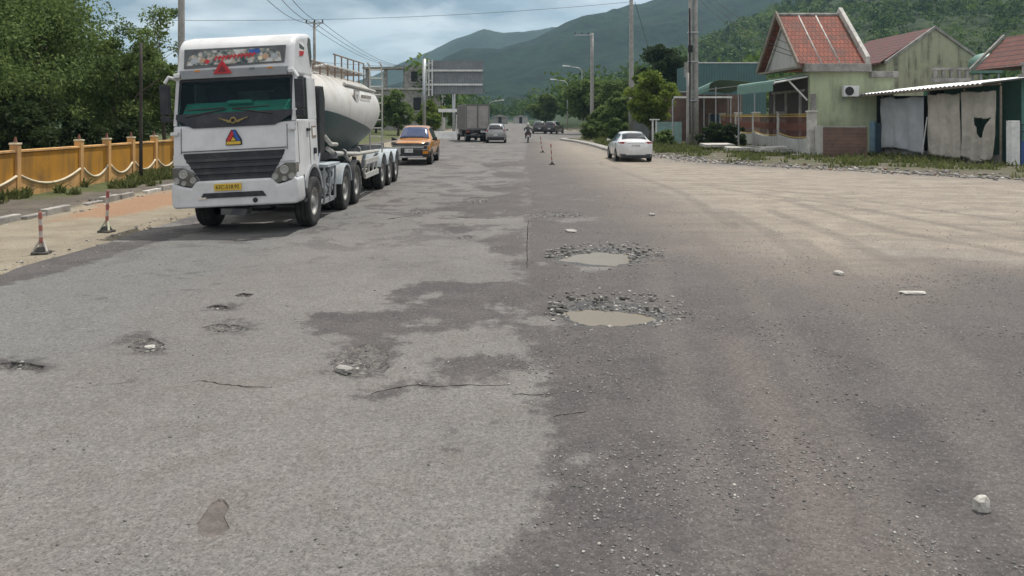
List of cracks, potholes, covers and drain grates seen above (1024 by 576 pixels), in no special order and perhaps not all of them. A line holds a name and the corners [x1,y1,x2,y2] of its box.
pothole [331,343,390,378]
pothole [544,286,696,327]
pothole [545,241,666,270]
pothole [0,360,46,370]
pothole [128,338,167,353]
crack [371,384,550,395]
pothole [201,324,253,333]
